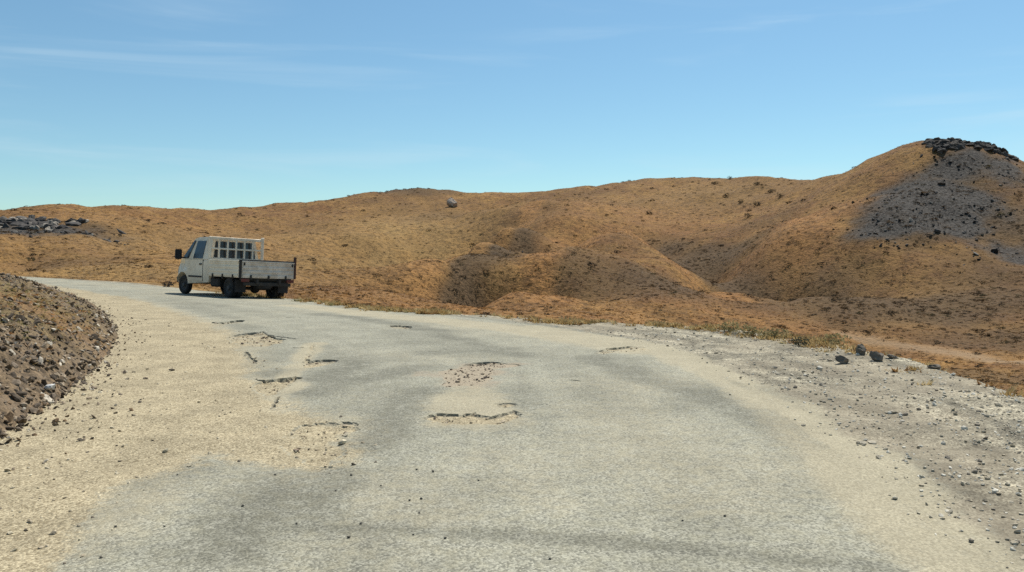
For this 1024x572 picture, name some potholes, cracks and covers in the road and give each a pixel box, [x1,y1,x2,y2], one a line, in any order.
pothole [595,346,652,354]
pothole [278,421,361,468]
pothole [423,410,522,427]
pothole [251,376,302,396]
pothole [436,362,523,388]
pothole [226,331,286,347]
